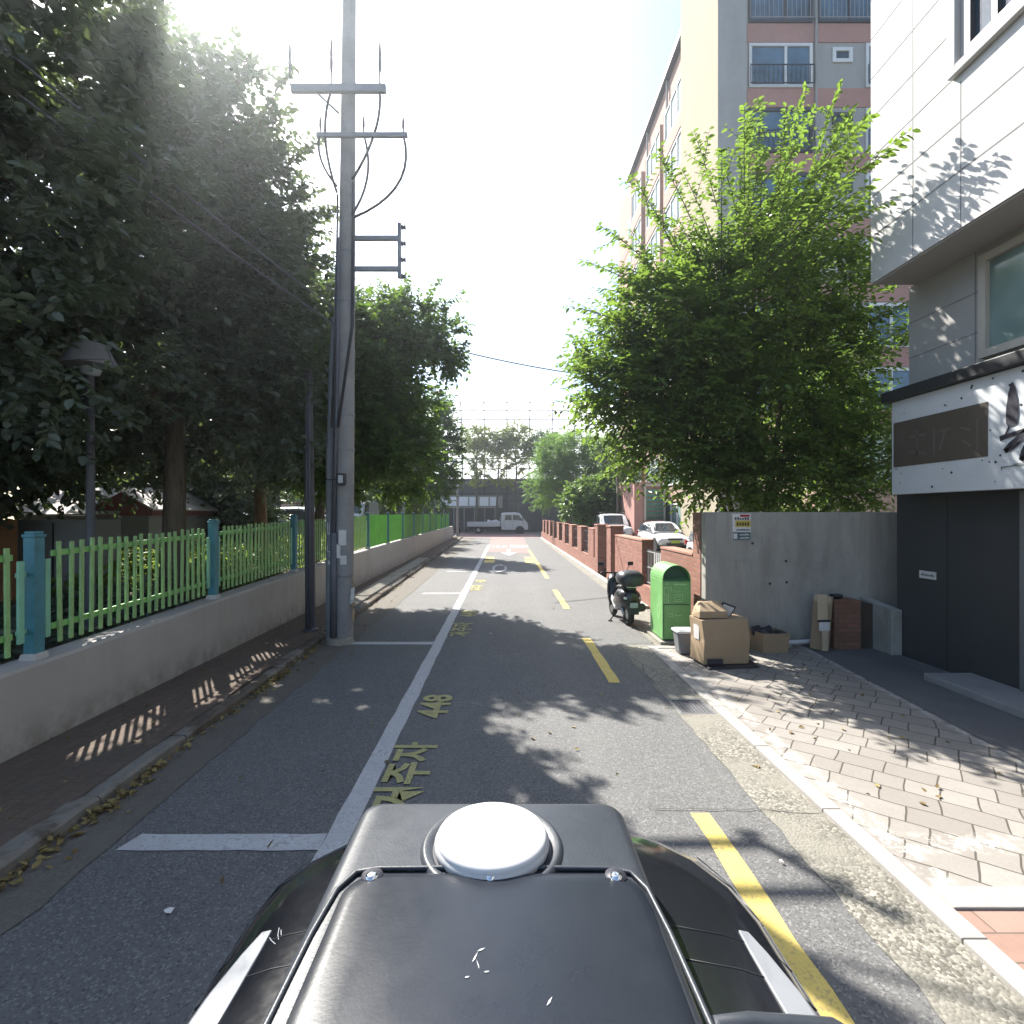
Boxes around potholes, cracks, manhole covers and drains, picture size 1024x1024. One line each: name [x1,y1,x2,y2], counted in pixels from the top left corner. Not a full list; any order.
drain grate [668,699,716,714]
